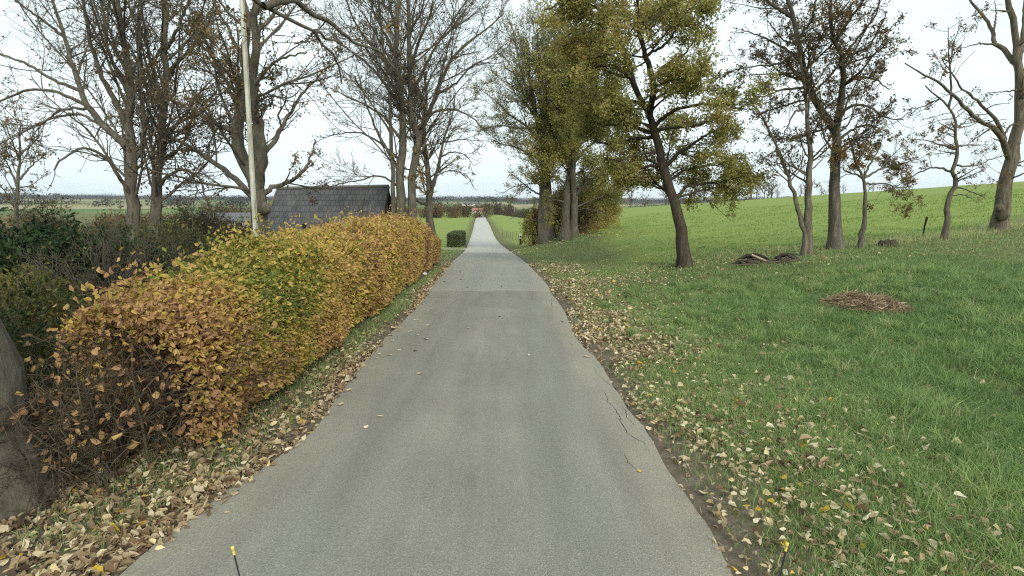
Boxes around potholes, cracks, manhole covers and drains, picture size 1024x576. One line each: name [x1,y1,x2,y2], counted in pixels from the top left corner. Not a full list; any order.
crack [602,378,646,465]
